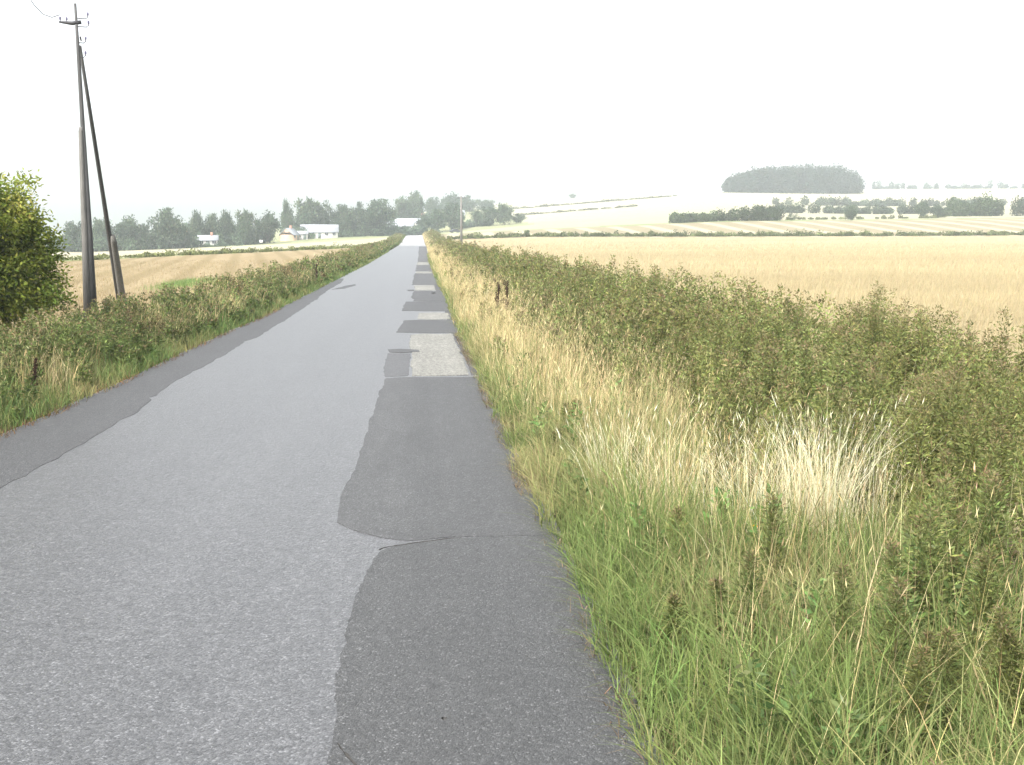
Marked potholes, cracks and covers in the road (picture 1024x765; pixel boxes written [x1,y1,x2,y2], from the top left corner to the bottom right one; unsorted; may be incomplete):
crack [379,537,461,550]
